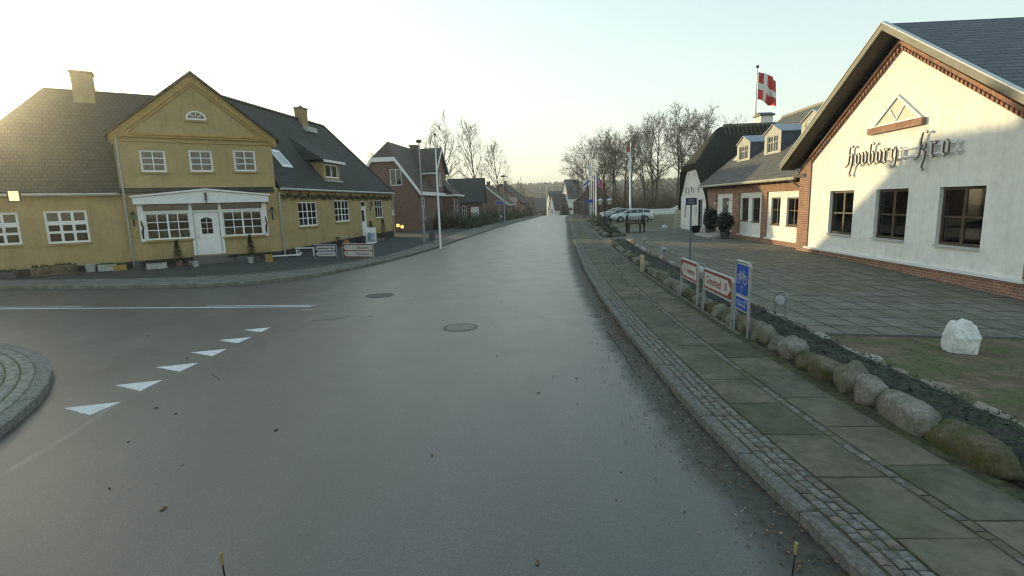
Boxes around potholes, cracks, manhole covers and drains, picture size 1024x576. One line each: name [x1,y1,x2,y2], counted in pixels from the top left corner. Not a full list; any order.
manhole cover [442,323,479,332]
